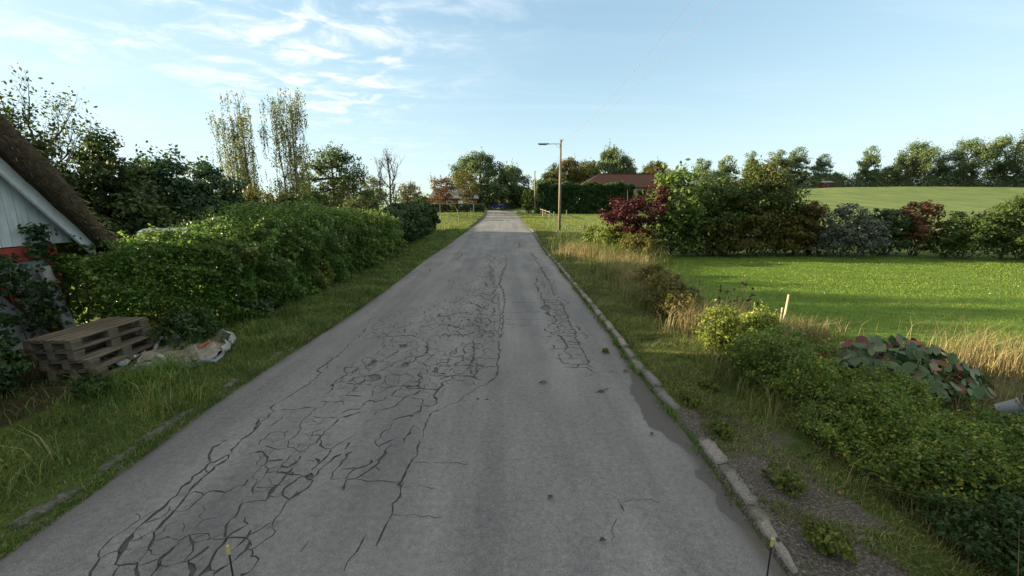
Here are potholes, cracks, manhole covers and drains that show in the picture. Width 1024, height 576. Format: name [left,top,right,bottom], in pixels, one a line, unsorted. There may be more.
crack [88,239,612,576]
